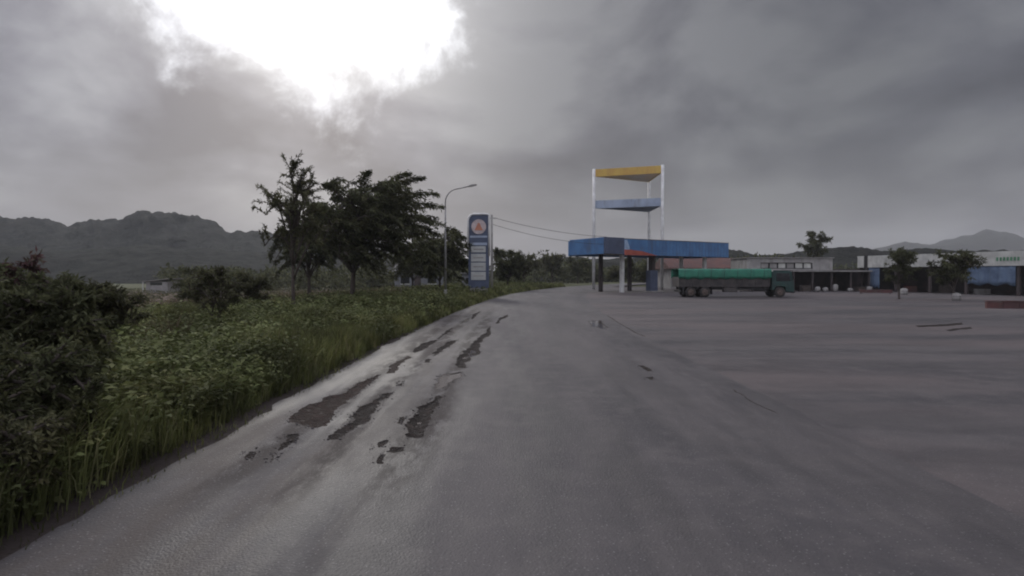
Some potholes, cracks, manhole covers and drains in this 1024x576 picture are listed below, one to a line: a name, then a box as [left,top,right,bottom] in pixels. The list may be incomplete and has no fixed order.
pothole [413,328,453,353]
pothole [455,326,491,368]
pothole [432,339,459,356]
pothole [386,356,411,374]
pothole [405,395,442,438]
pothole [328,392,393,440]
pothole [288,375,380,428]
